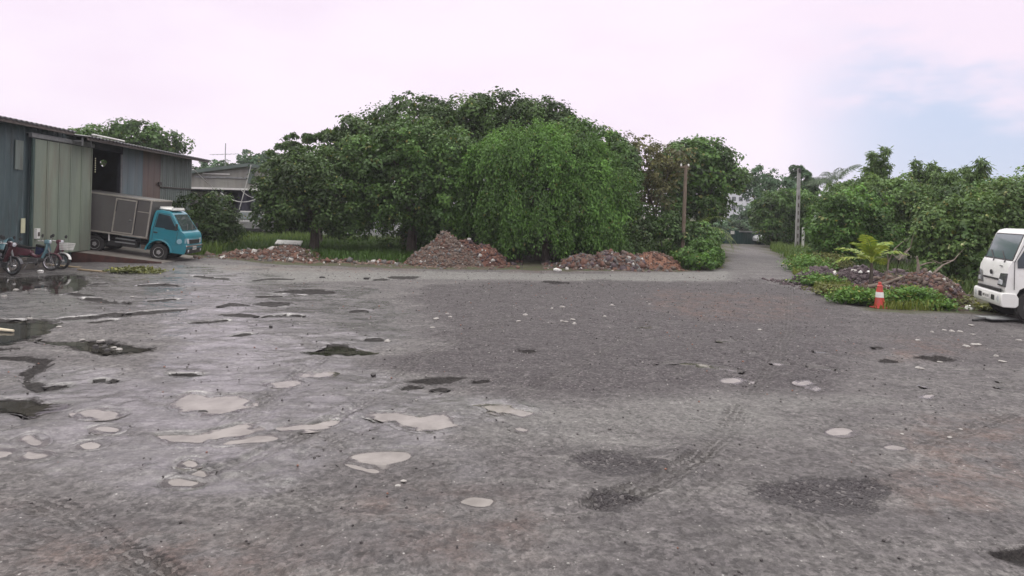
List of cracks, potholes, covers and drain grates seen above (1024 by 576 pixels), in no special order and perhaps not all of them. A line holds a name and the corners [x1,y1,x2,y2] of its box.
pothole [399,376,470,387]
pothole [816,423,863,439]
pothole [39,273,92,295]
pothole [340,446,425,471]
pothole [162,391,261,417]
pothole [203,432,291,447]
pothole [336,462,388,477]
pothole [361,411,470,435]
pothole [296,343,379,357]
pothole [144,423,266,449]
